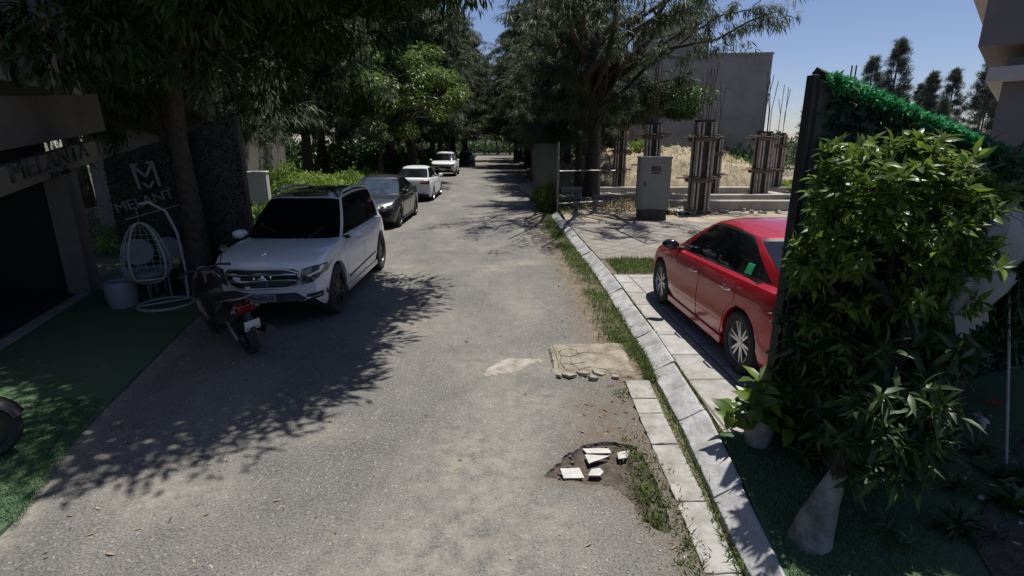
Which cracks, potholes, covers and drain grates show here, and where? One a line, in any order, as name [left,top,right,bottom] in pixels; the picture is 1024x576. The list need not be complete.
pothole [544,441,672,534]
crack [553,347,632,373]
